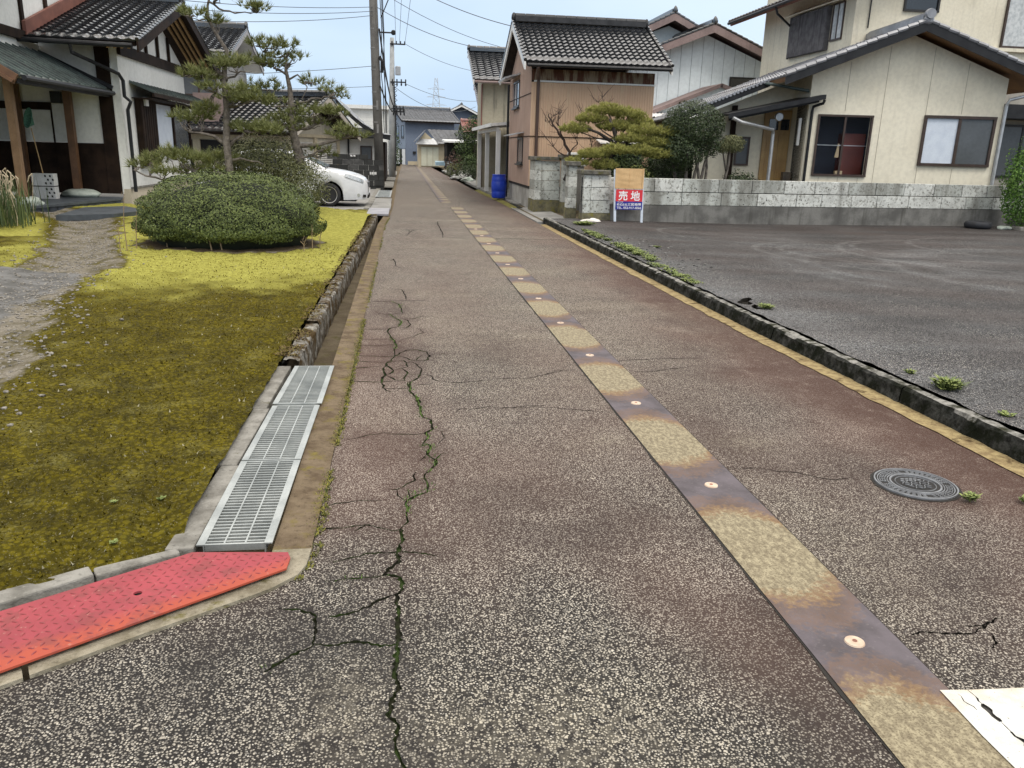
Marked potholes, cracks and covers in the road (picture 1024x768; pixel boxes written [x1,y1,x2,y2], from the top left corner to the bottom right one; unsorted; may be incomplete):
crack [960,690,1024,743]
crack [912,616,1003,648]
crack [726,467,851,480]
crack [259,289,562,768]
manhole cover [870,468,963,502]
drain grate [242,405,320,461]
crack [454,405,603,414]
drain grate [273,366,334,406]
drain grate [196,460,301,552]
